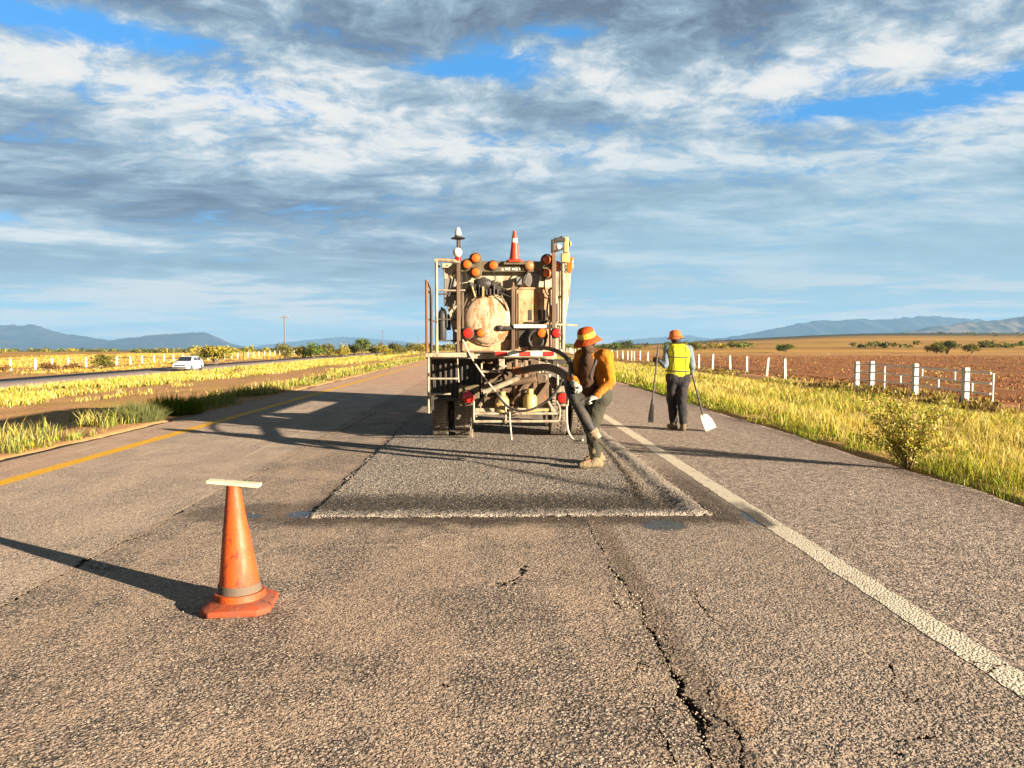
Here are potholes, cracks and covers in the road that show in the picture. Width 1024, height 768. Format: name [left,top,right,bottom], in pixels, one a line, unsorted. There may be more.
crack [705,682,746,768]
crack [891,734,937,757]
crack [693,586,727,631]
crack [886,663,953,703]
